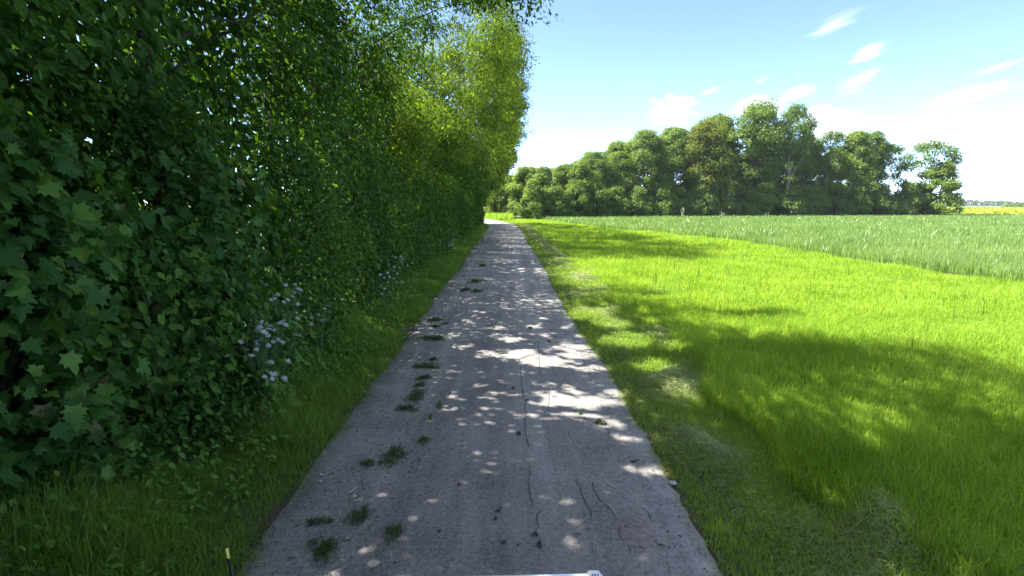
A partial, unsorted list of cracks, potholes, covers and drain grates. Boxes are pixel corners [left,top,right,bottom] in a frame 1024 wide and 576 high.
crack [563,431,669,569]
crack [520,340,550,446]
crack [528,466,542,540]
